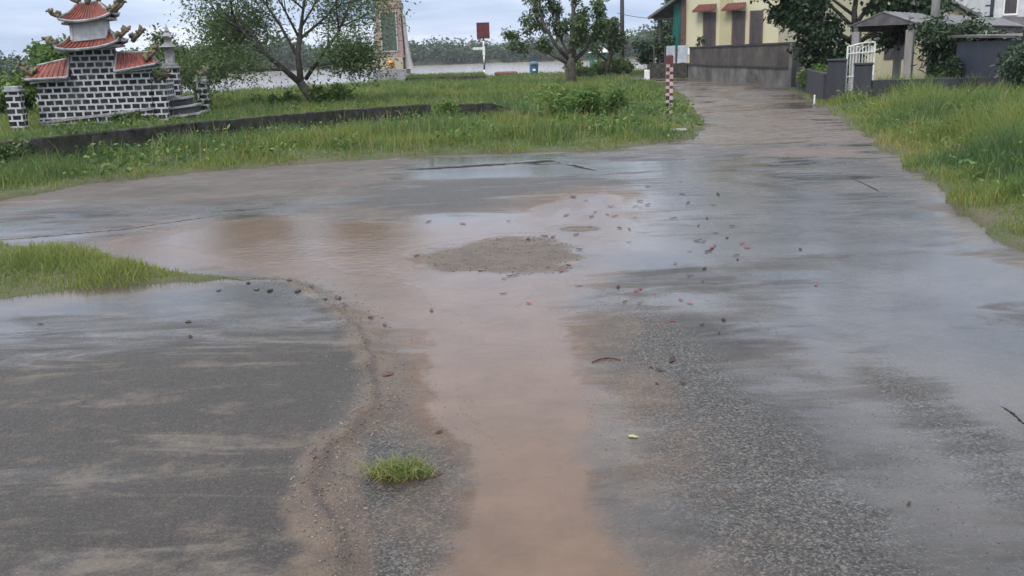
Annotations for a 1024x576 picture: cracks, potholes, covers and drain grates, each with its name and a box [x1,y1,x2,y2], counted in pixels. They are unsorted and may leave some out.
crack [826,174,908,197]
